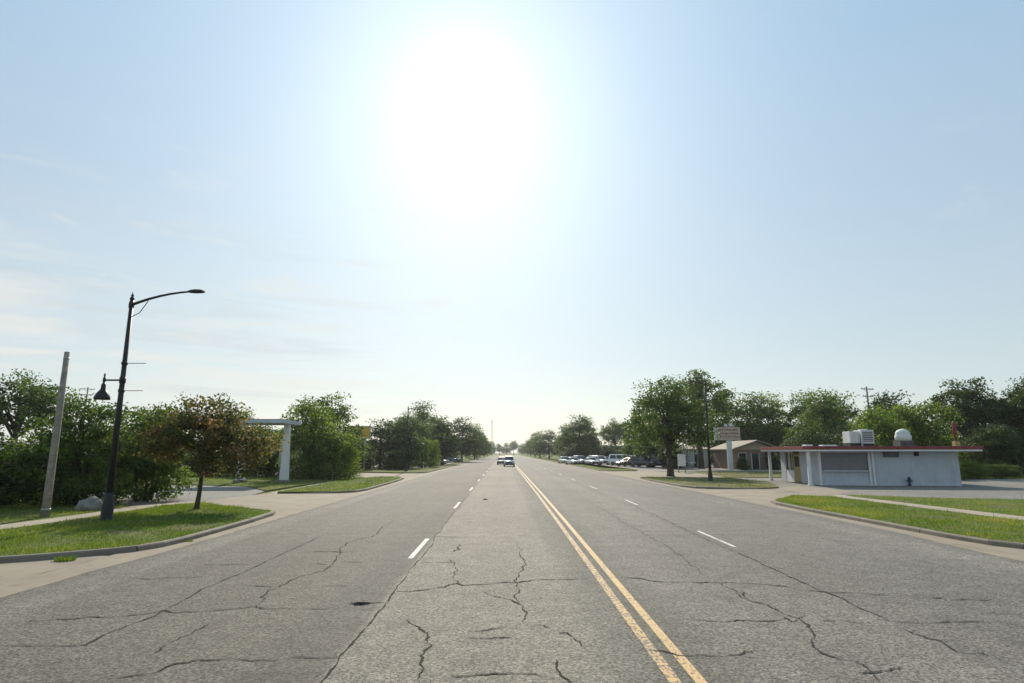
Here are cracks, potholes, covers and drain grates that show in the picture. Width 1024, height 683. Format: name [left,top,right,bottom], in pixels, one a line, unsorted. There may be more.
crack [588,501,901,681]
crack [904,628,990,656]
crack [414,536,586,683]
crack [30,524,387,679]
crack [408,621,432,683]
